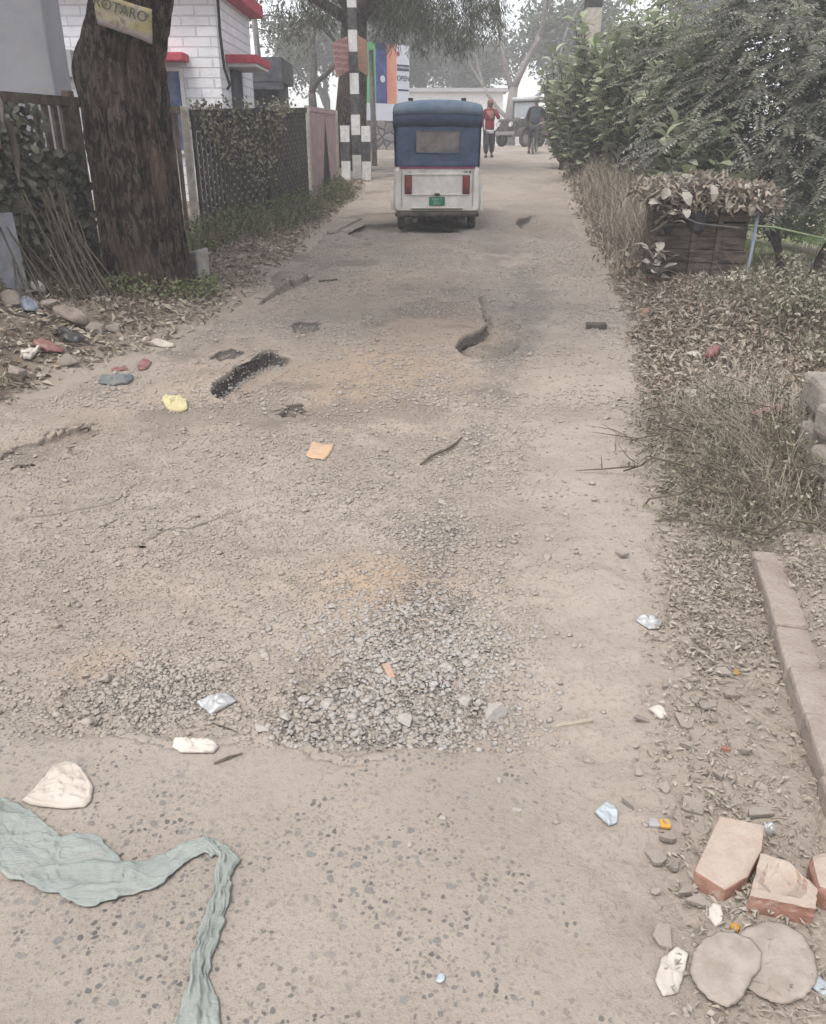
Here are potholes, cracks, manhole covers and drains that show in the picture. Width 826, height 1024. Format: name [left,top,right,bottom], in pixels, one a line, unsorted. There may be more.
pothole [266,399,319,422]
pothole [443,293,543,363]
pothole [246,272,322,309]
pothole [199,347,314,404]
pothole [282,320,333,339]
